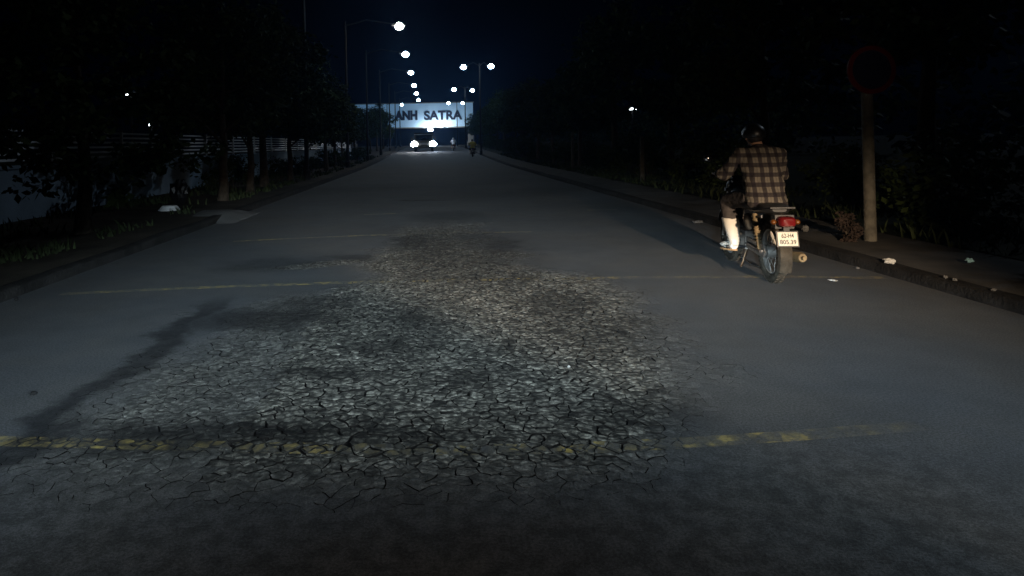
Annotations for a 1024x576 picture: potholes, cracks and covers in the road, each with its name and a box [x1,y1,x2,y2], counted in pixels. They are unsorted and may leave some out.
crack [0,200,774,522]
